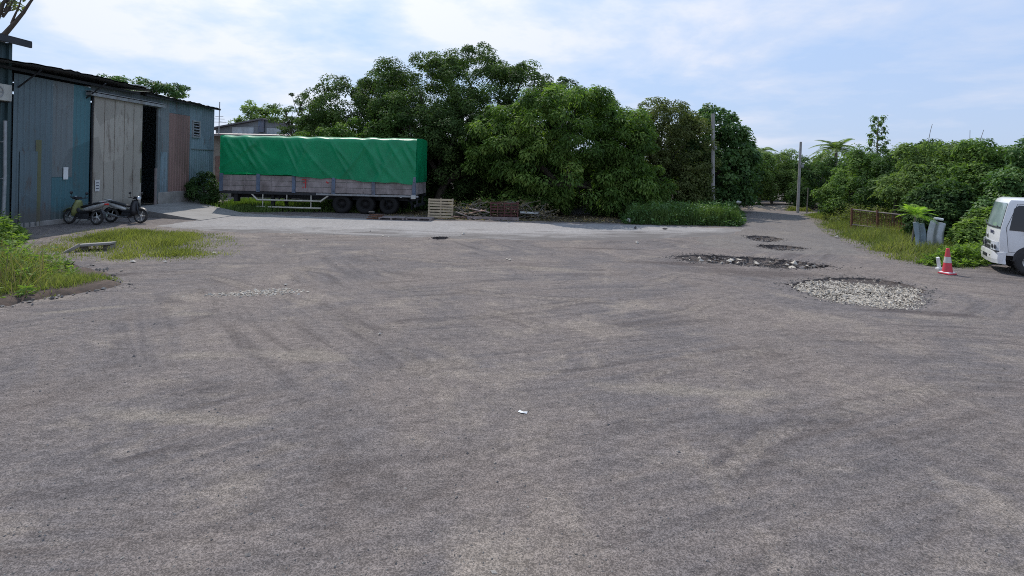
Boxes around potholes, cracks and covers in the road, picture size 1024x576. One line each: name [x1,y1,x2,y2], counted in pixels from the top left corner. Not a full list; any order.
pothole [774,275,942,312]
pothole [658,252,862,272]
pothole [757,243,811,251]
